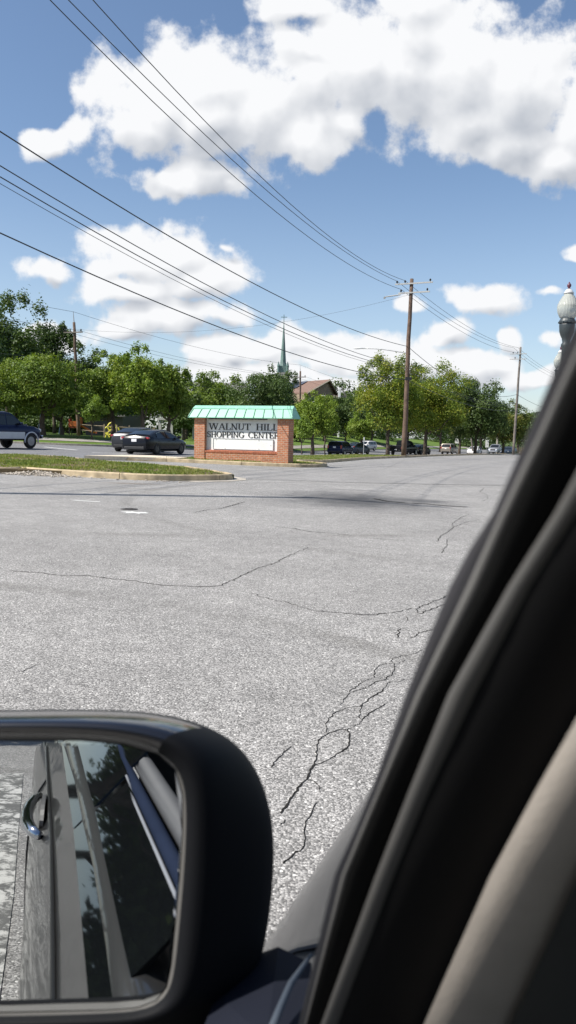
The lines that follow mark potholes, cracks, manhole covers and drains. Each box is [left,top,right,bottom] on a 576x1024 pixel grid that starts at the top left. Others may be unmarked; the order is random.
crack [10,547,308,587]
crack [252,593,445,638]
crack [373,498,476,553]
crack [271,650,421,863]
